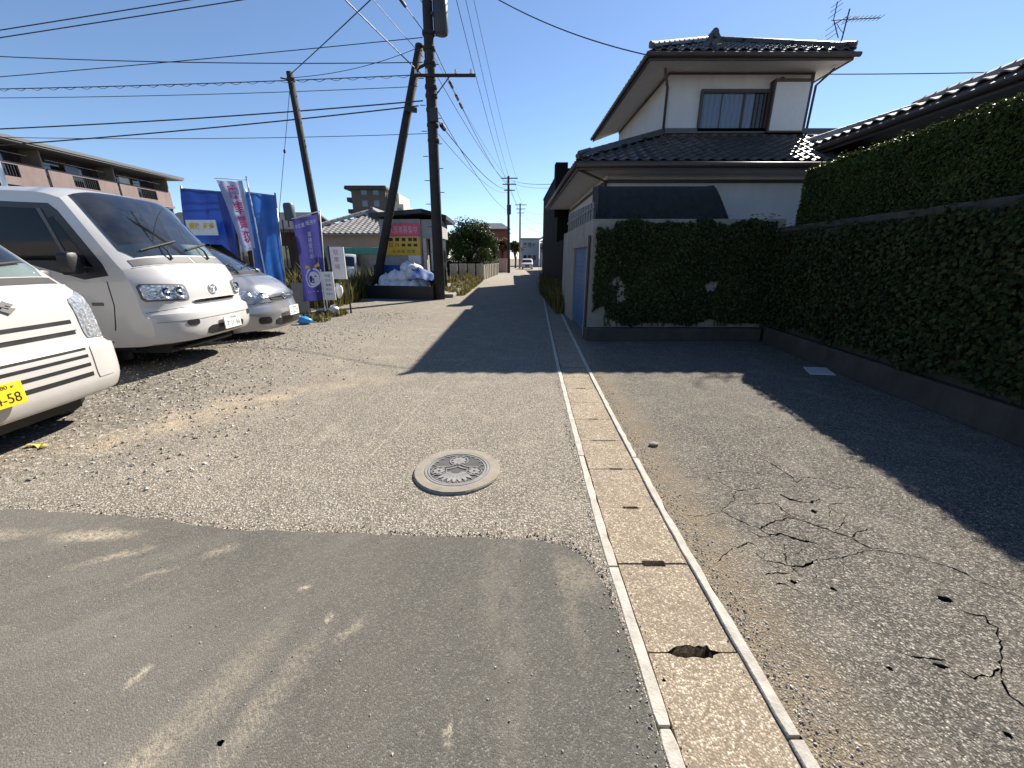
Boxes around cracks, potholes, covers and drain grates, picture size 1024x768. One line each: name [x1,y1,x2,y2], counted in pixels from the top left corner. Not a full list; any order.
pothole [668,645,719,658]
manhole cover [413,449,500,496]
crack [899,610,1024,707]
crack [684,460,1024,600]
